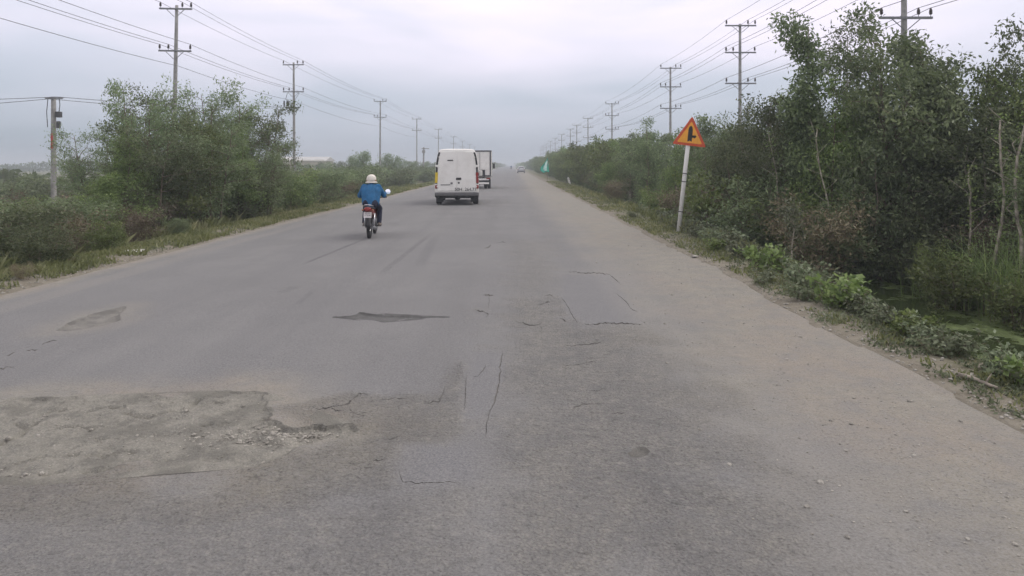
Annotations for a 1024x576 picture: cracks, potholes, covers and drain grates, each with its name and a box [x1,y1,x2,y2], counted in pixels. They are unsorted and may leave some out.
pothole [627,446,650,458]
pothole [56,306,127,331]
pothole [332,312,447,323]
pothole [0,390,360,486]
crack [464,354,503,433]
crack [374,435,462,484]
crack [538,271,641,325]
